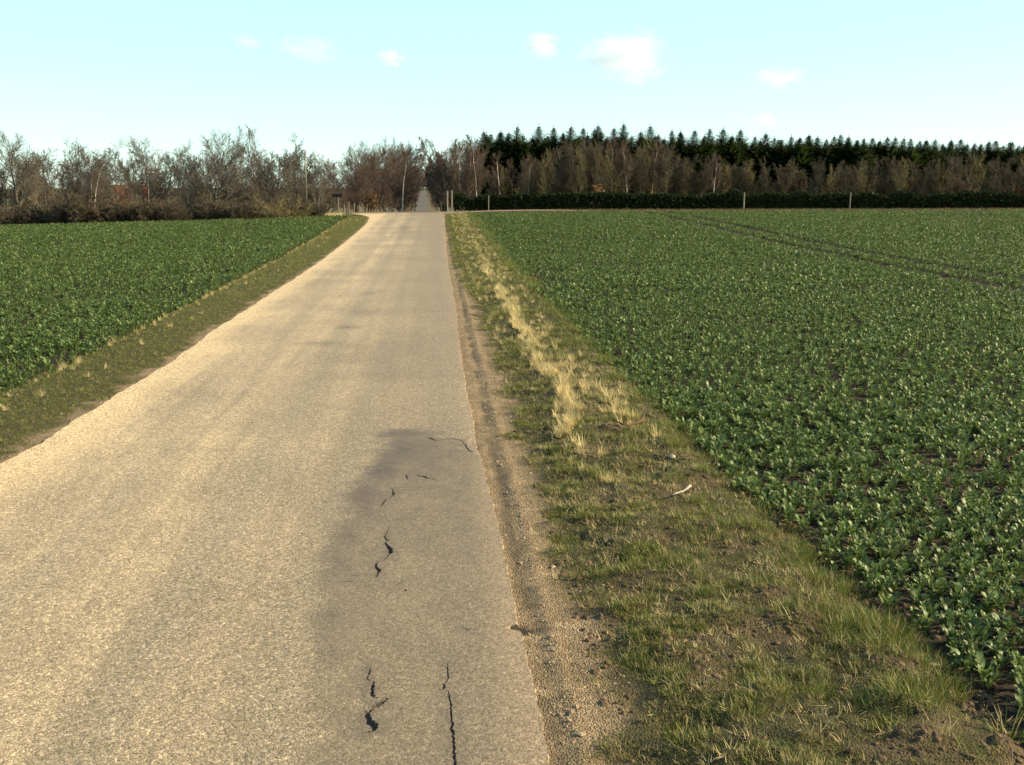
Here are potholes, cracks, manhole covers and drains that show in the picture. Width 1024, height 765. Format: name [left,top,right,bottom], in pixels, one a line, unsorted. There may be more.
crack [380,474,429,507]
crack [374,529,393,577]
crack [441,663,457,765]
crack [358,667,389,736]
